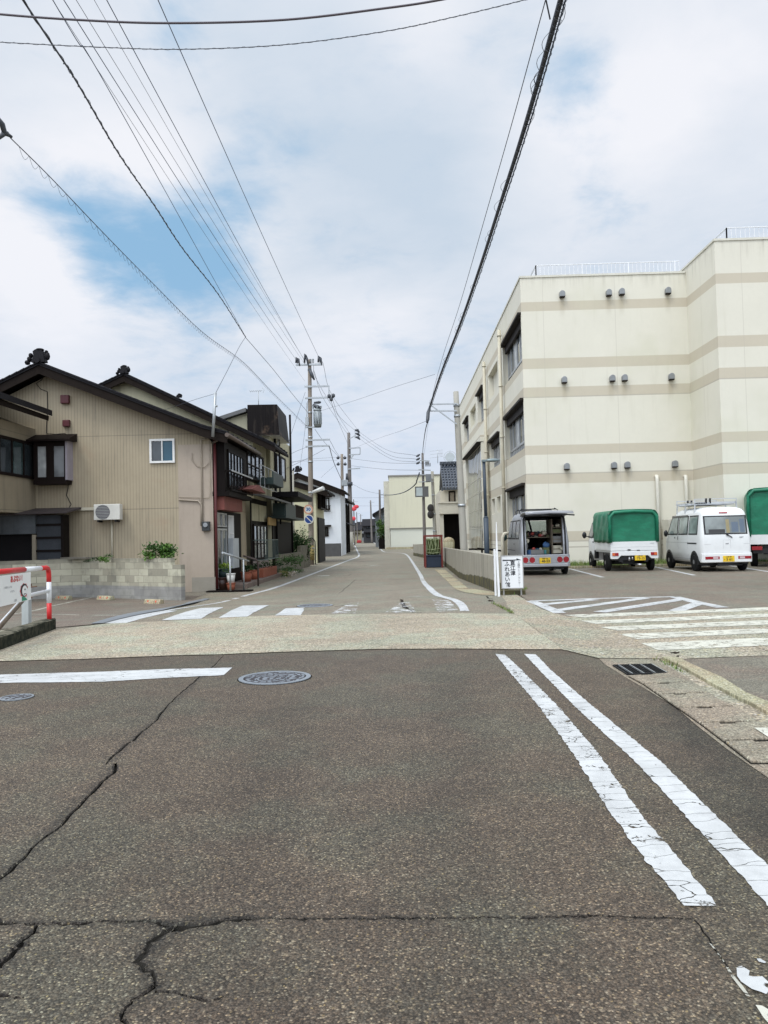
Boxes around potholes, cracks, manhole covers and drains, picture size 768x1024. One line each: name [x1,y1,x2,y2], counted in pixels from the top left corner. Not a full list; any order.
manhole cover [0,693,35,701]
crack [0,913,732,1024]
drain grate [612,663,668,675]
crack [0,656,223,880]
manhole cover [237,671,312,685]
